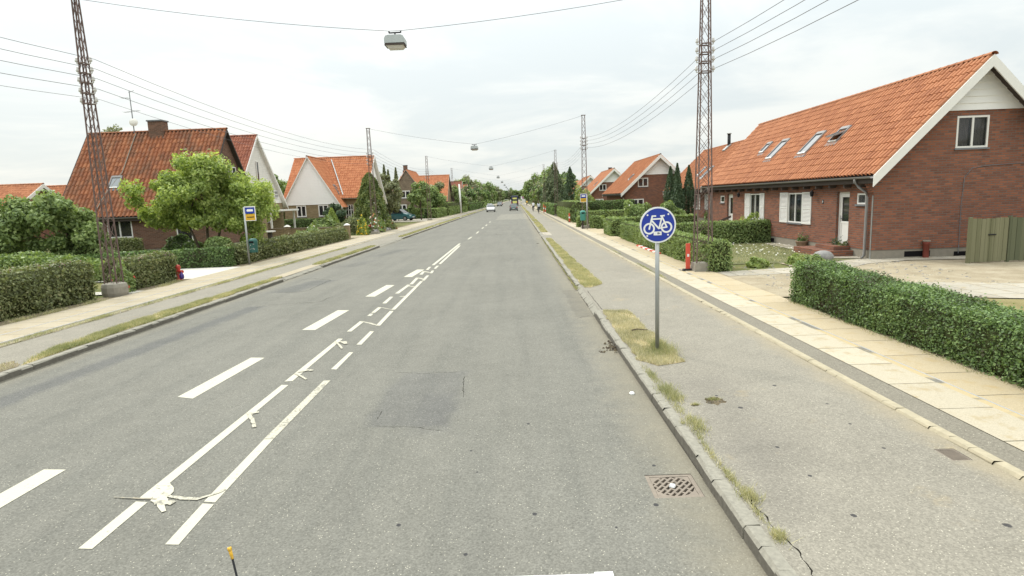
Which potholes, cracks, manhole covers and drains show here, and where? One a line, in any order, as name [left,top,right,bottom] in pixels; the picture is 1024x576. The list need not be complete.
drain grate [644,474,705,498]
crack [751,500,813,576]
drain grate [934,449,972,461]
